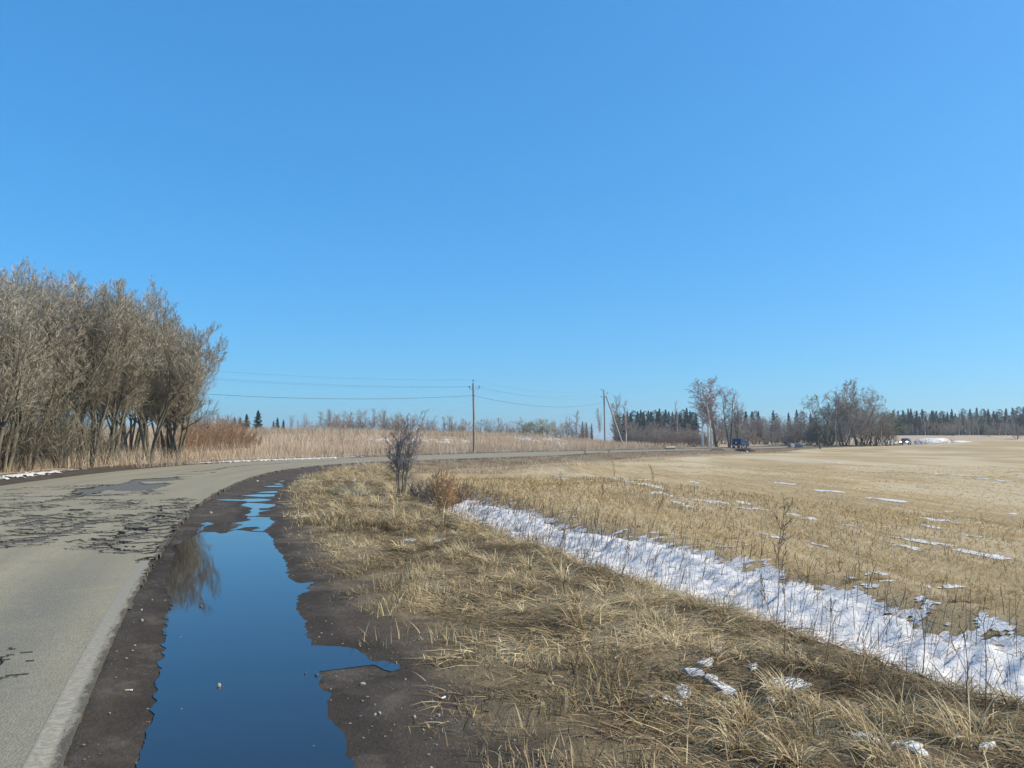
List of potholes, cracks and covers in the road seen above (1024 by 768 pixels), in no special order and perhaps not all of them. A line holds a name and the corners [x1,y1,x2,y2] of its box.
crack [0,484,196,566]
crack [0,647,34,680]
pothole [75,476,182,496]
